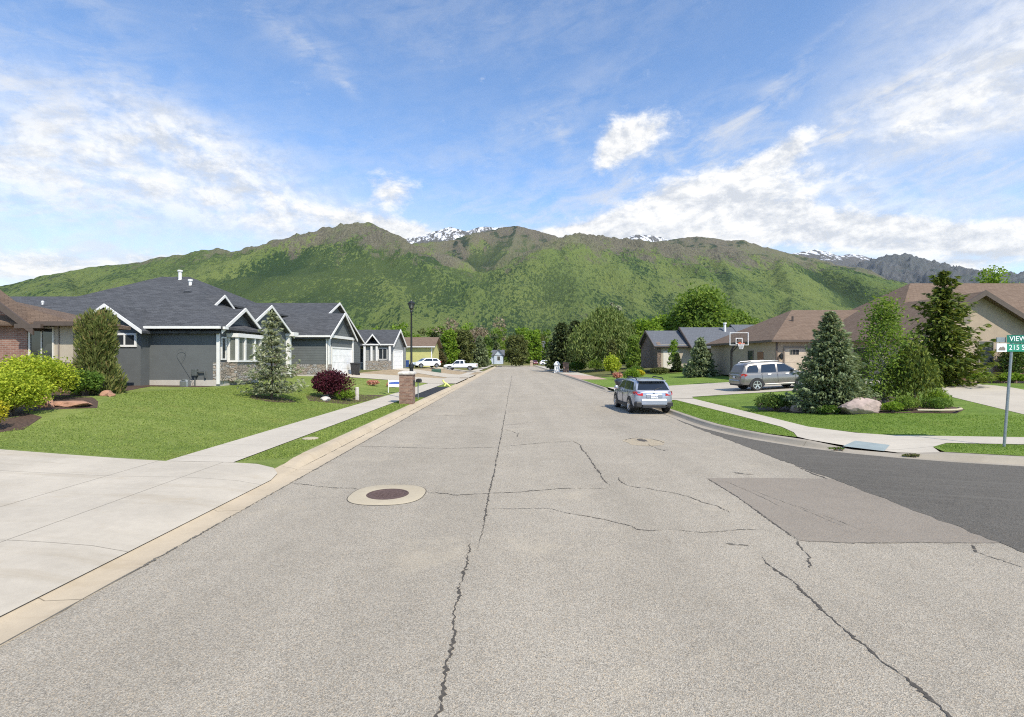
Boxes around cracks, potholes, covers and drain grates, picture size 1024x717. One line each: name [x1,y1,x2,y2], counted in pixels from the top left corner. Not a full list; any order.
crack [505,429,729,512]
manhole cover [366,489,409,500]
crack [435,488,952,717]
